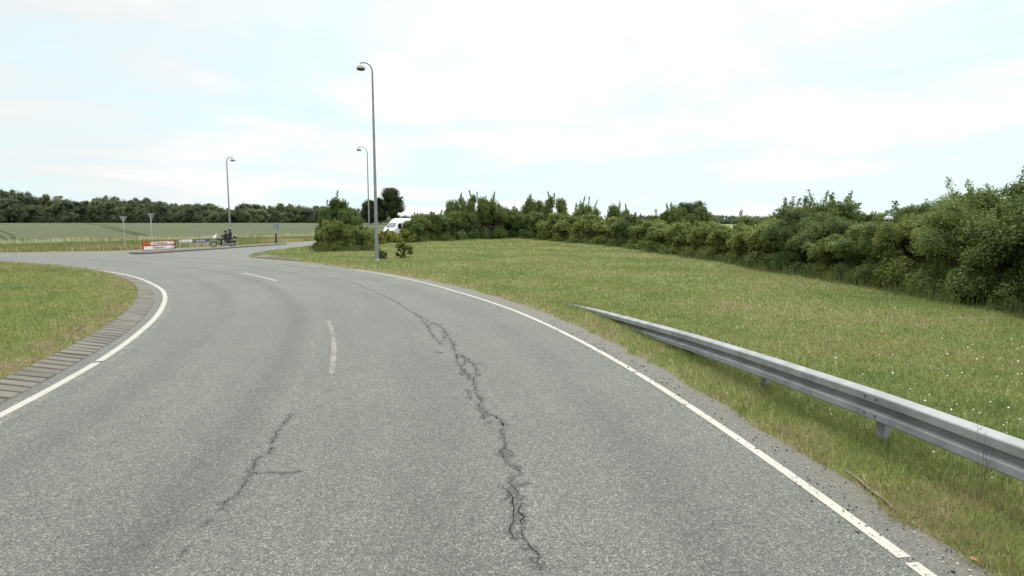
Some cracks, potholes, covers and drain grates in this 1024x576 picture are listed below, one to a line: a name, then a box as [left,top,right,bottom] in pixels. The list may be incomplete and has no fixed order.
crack [331,278,541,570]
crack [207,415,293,523]
